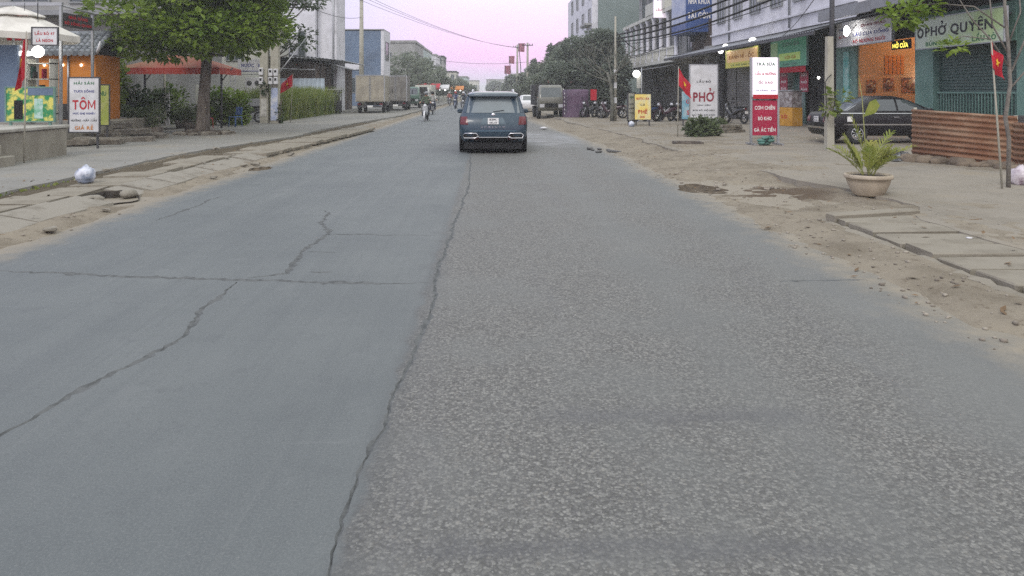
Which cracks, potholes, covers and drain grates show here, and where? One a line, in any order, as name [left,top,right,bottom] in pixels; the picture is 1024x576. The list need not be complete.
crack [156,196,223,221]
crack [0,210,434,437]
